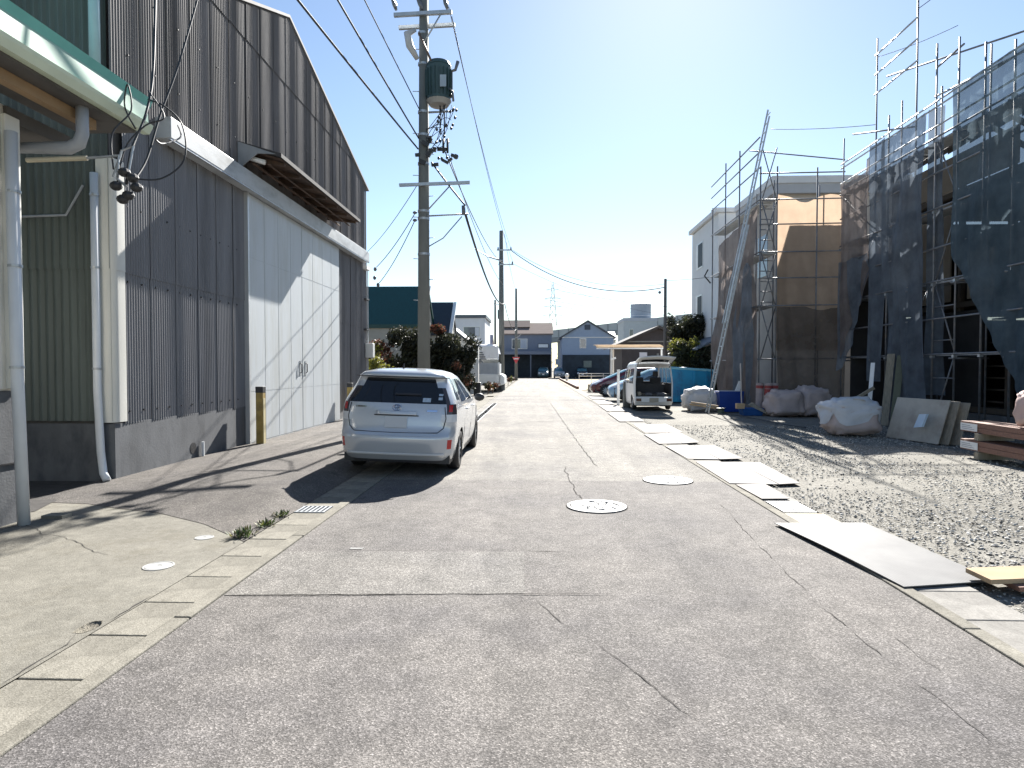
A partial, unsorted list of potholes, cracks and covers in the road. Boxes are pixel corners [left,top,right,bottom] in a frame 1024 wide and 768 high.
manhole cover [142,561,175,571]
pothole [73,621,102,633]
crack [242,593,769,746]
manhole cover [642,476,694,485]
crack [482,404,597,498]
crack [720,504,995,744]
manhole cover [566,500,628,514]
